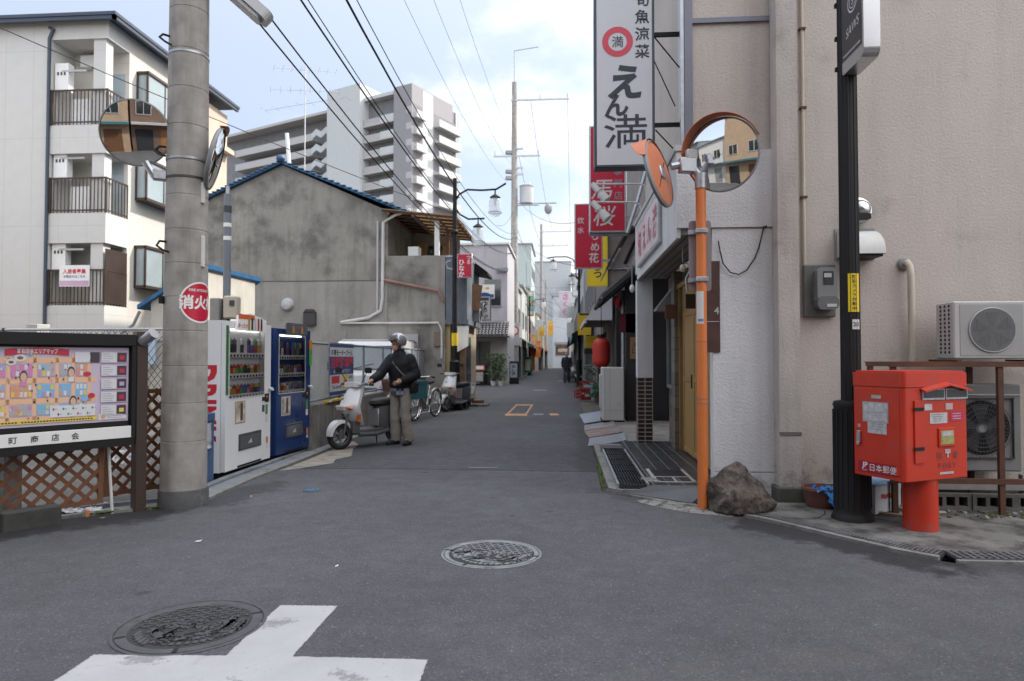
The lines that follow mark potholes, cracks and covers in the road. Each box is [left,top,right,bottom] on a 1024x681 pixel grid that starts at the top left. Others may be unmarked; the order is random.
manhole cover [441,540,542,569]
drain grate [604,449,646,489]
drain grate [944,550,1024,561]
manhole cover [108,600,267,656]
